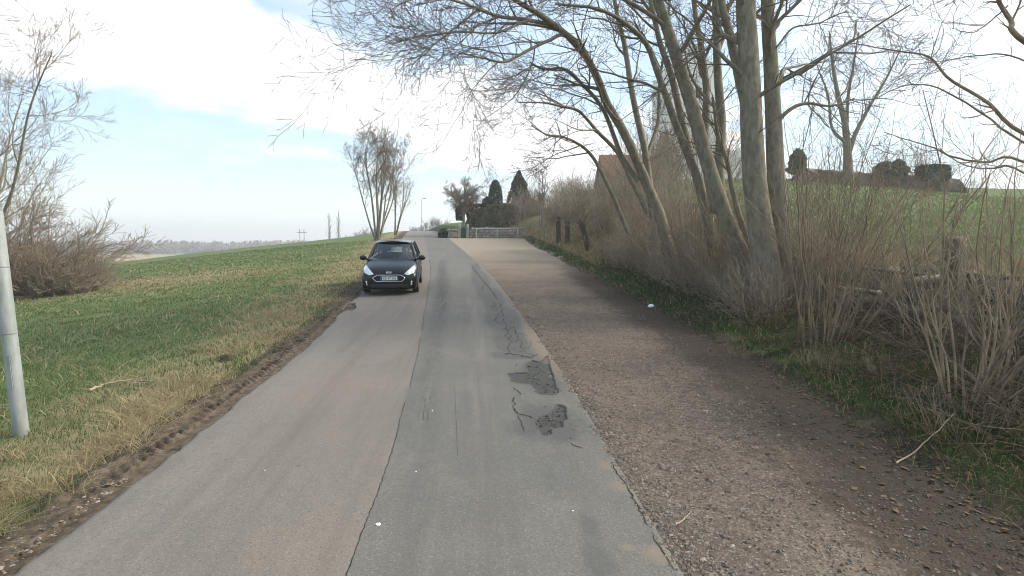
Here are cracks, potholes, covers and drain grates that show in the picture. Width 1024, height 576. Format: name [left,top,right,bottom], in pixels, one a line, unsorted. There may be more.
pothole [528,402,575,438]
crack [512,388,533,432]
pothole [501,355,566,398]
crack [474,269,537,358]
pothole [334,303,360,317]
